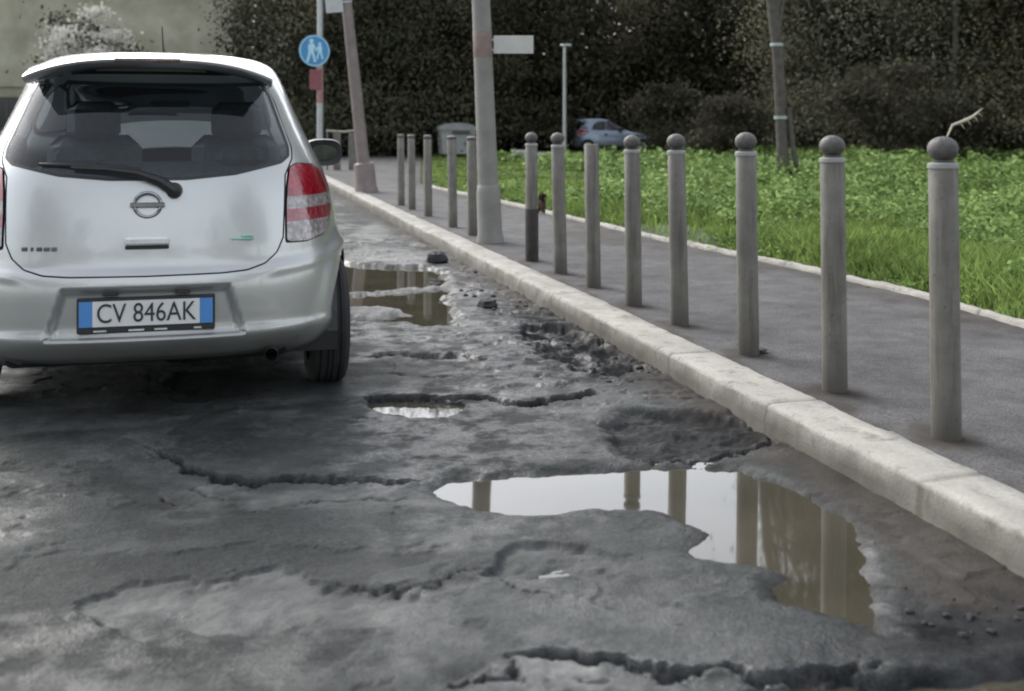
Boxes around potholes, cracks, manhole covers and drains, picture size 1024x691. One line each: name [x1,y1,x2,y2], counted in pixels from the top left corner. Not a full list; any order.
pothole [591,405,774,465]
pothole [420,464,884,636]
crack [384,579,451,601]
crack [158,451,421,513]
pothole [366,399,466,410]
crack [450,649,878,691]
pothole [517,322,639,380]
pothole [344,261,467,327]
